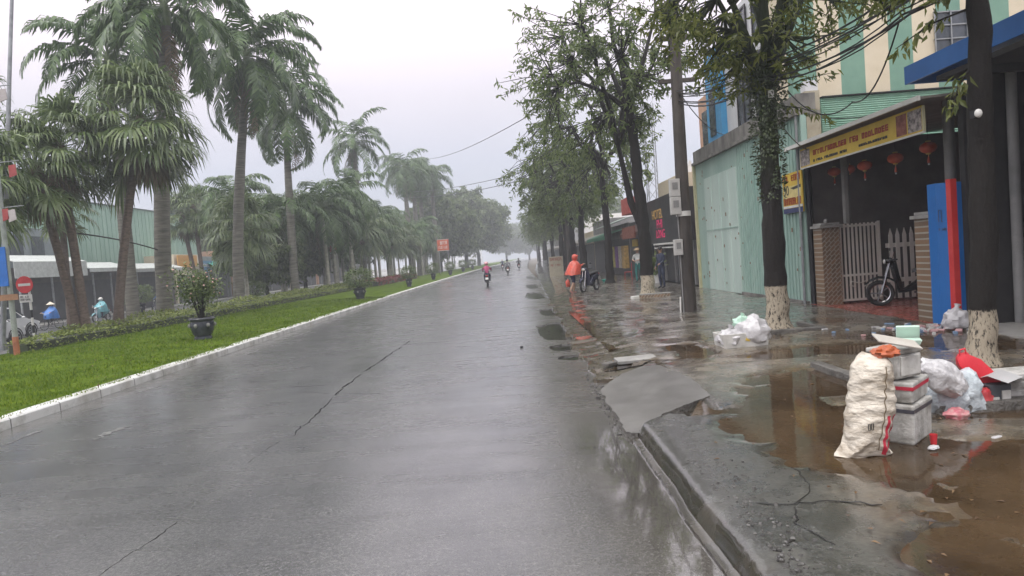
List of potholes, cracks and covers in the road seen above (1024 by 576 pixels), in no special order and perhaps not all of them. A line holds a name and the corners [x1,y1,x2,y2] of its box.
crack [754,467,882,545]
crack [99,341,409,576]
pothole [536,322,572,340]
